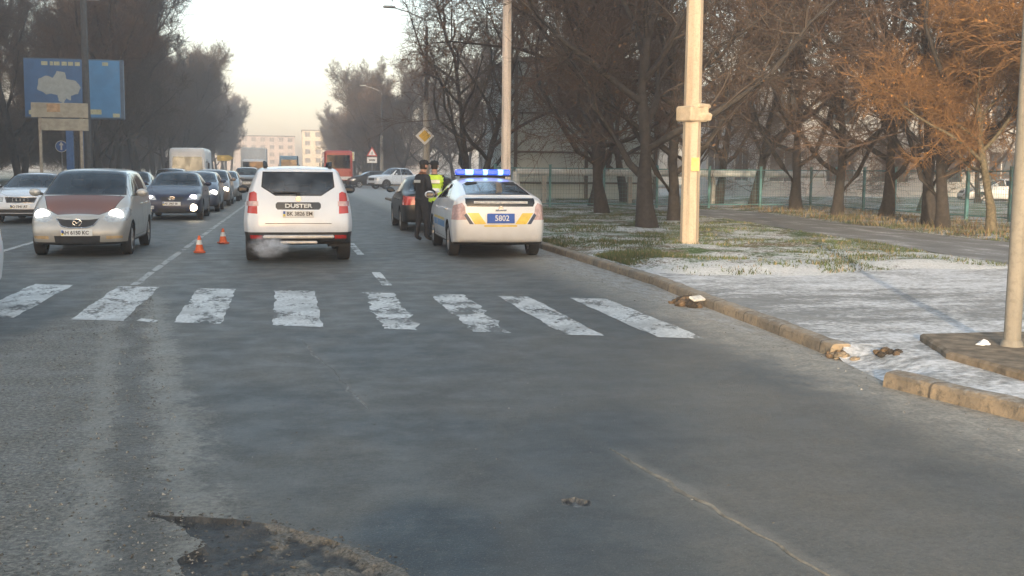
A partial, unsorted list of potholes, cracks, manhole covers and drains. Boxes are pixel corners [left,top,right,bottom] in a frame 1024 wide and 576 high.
pothole [147,514,409,576]
crack [302,340,370,410]
crack [610,448,831,576]
pothole [560,497,591,507]
